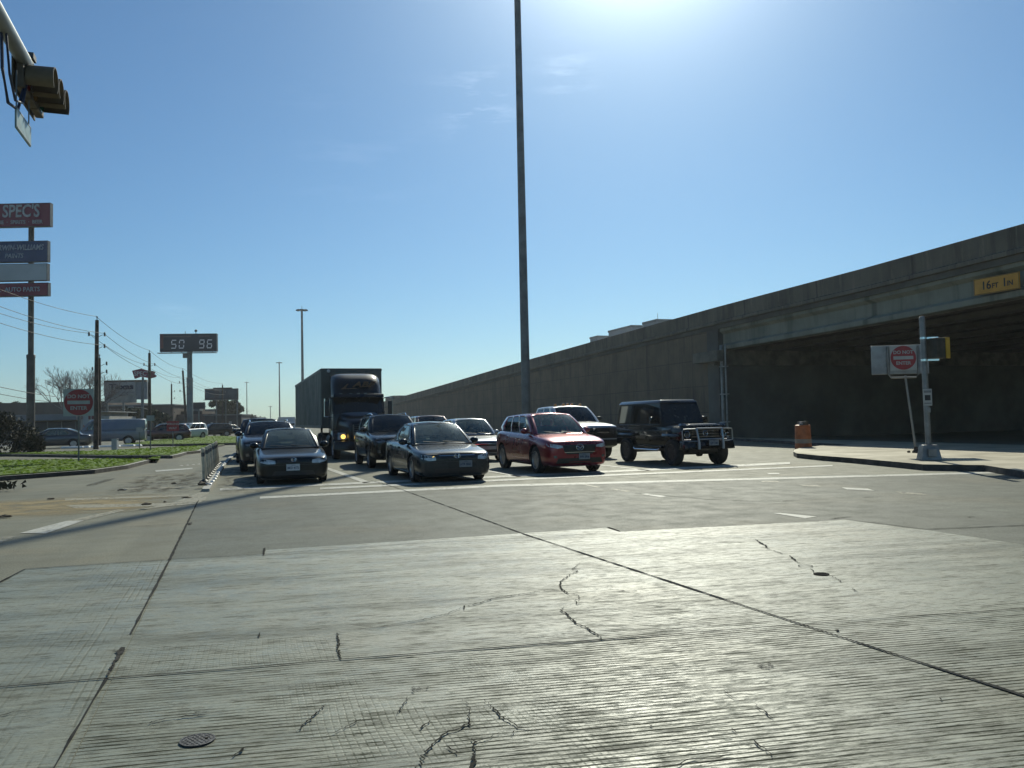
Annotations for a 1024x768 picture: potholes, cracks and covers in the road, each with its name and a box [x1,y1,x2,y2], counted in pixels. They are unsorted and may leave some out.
crack [381,564,603,640]
manhole cover [179,733,216,747]
crack [336,632,344,659]
crack [415,699,529,768]
